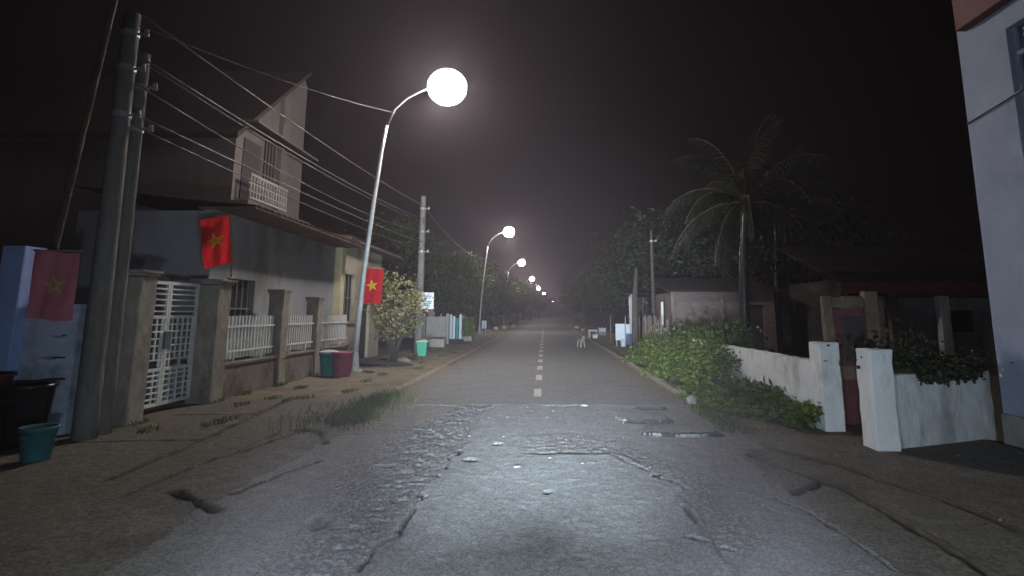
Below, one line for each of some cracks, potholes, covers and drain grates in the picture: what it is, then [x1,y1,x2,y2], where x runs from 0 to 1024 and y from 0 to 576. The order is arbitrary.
pothole [788,480,833,497]
crack [355,425,469,573]
pothole [641,425,727,437]
pothole [161,488,228,515]
pothole [615,411,675,424]
crack [512,452,740,552]
